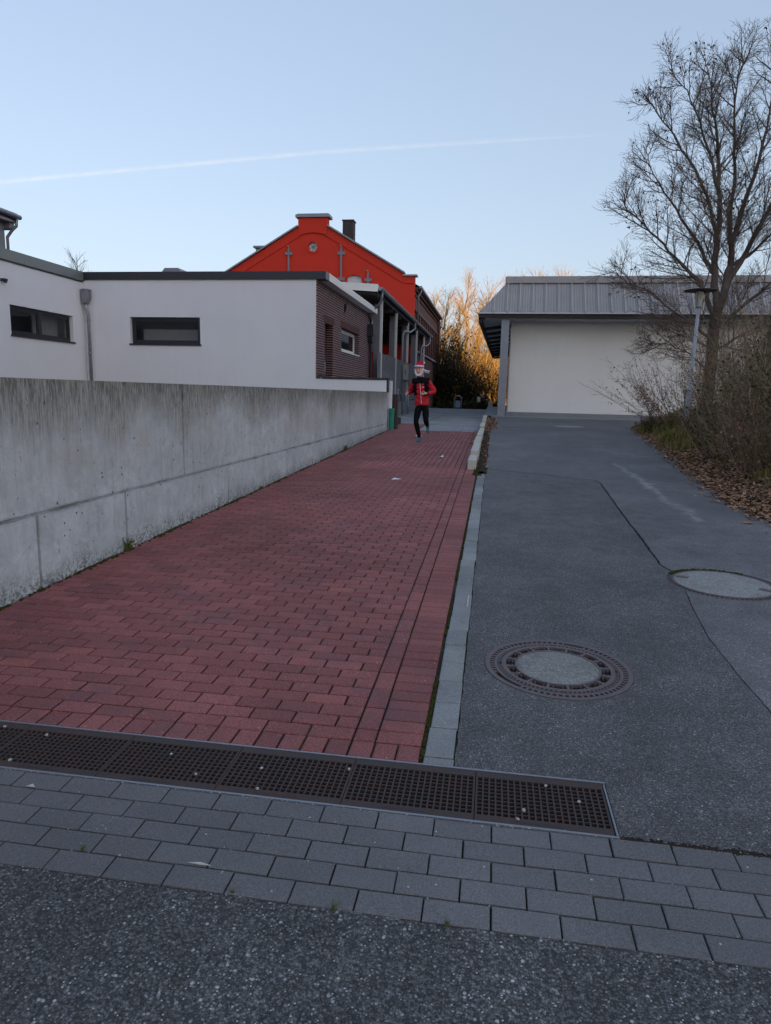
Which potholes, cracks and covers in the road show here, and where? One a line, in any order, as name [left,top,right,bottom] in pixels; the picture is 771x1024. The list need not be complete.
drain grate [95,735,243,790]
drain grate [340,758,476,820]
manhole cover [665,568,771,601]
drain grate [214,747,357,805]
manhole cover [485,640,634,701]
drain grate [0,721,33,750]
drain grate [474,771,615,836]
